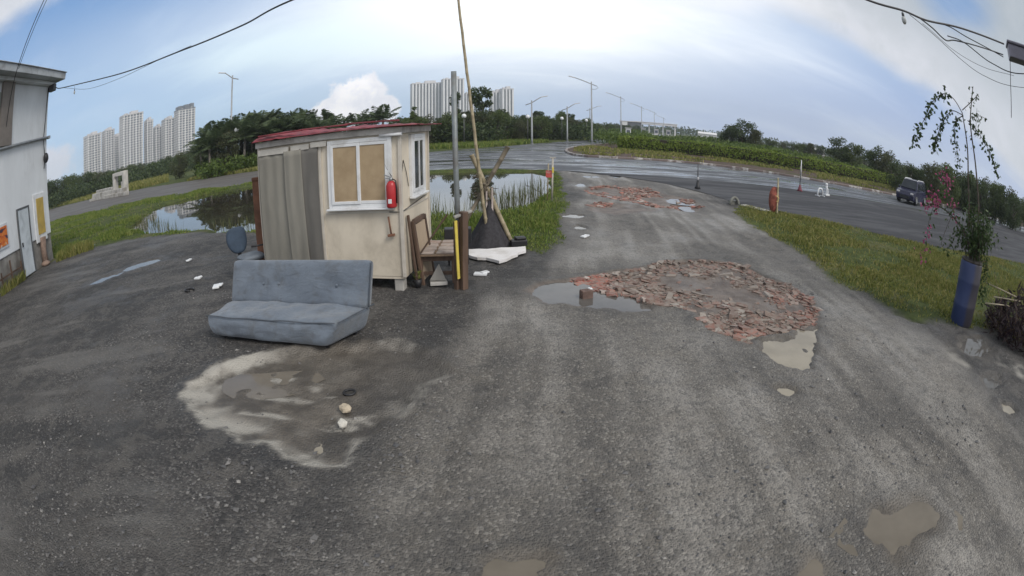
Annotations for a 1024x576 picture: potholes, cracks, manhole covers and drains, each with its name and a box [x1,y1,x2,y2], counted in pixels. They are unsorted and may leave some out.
pothole [828,490,963,575]
pothole [175,337,462,471]
pothole [80,256,168,288]
pothole [584,201,664,216]
pothole [468,544,568,576]
pothole [581,185,705,212]
pothole [518,258,826,373]
pothole [765,378,804,401]
